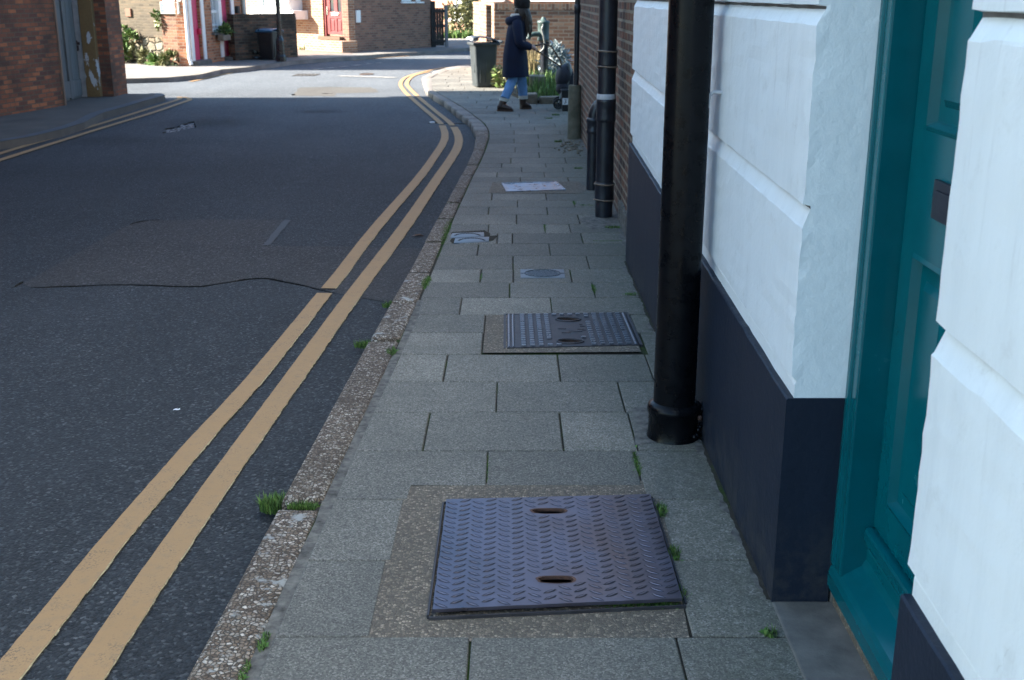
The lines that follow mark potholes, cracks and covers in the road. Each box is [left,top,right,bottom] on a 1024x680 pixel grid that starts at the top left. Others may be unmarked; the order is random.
manhole cover [502,181,566,192]
manhole cover [427,494,687,621]
manhole cover [503,312,643,349]
utility cover [520,269,565,278]
pothole [162,121,196,133]
